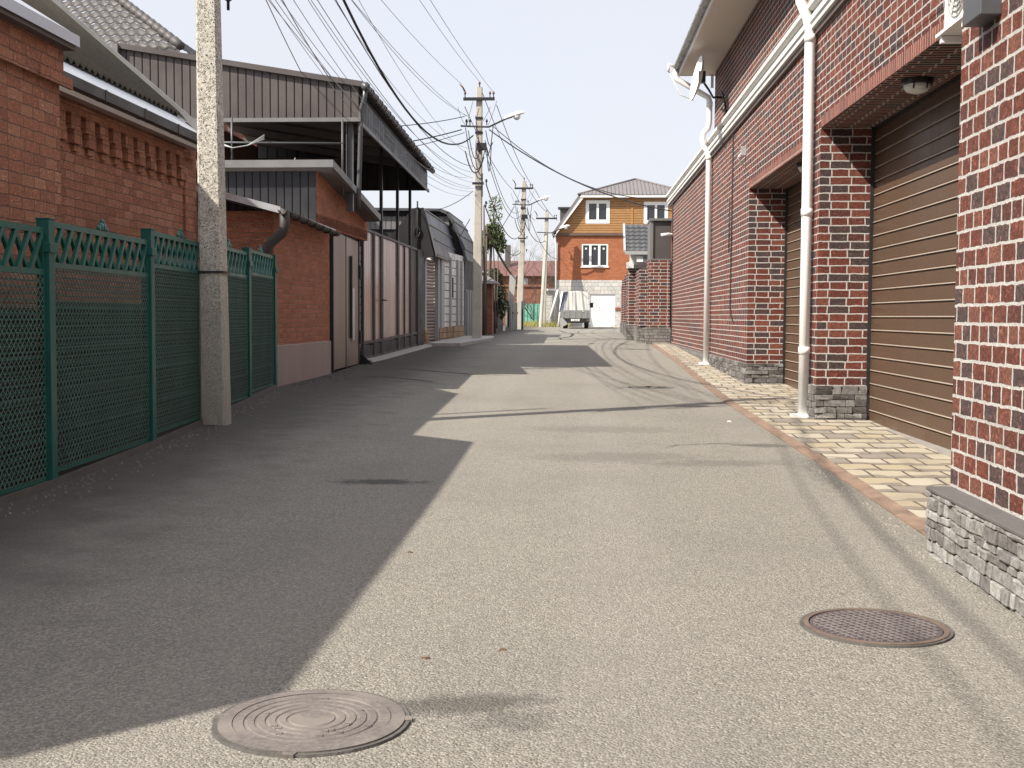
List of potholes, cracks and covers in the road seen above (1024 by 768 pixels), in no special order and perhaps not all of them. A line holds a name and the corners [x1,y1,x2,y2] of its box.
manhole cover [211,689,413,759]
manhole cover [799,608,954,648]
